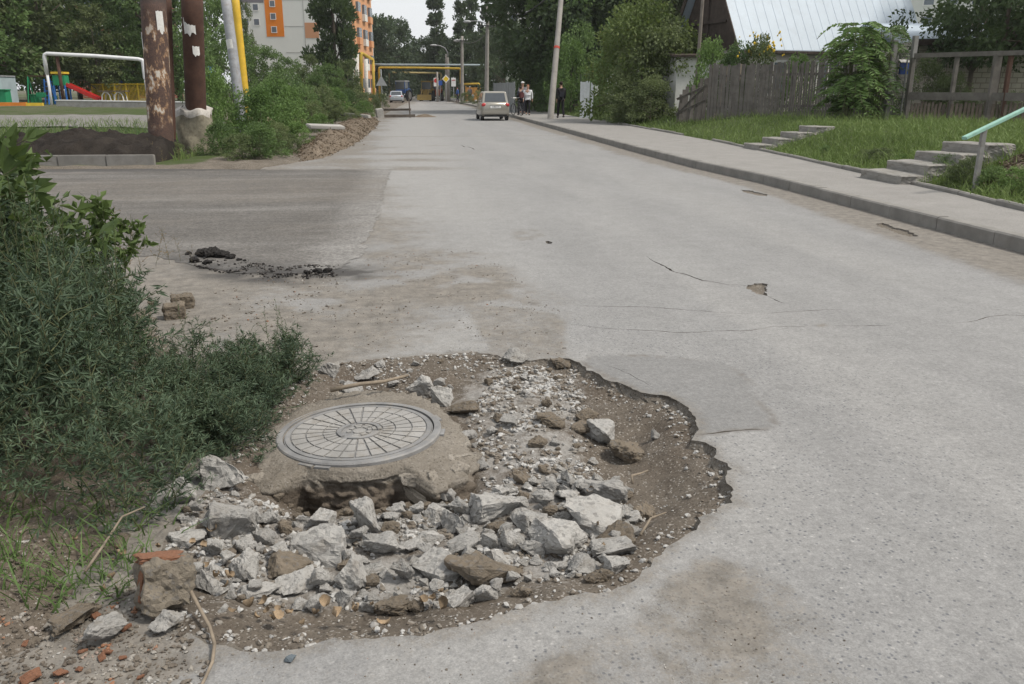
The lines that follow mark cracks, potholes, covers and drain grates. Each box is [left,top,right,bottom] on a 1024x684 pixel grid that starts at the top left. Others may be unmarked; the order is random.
crack [574,258,881,333]
pothole [161,352,733,652]
manhole cover [284,405,433,461]
pothole [746,283,768,296]
